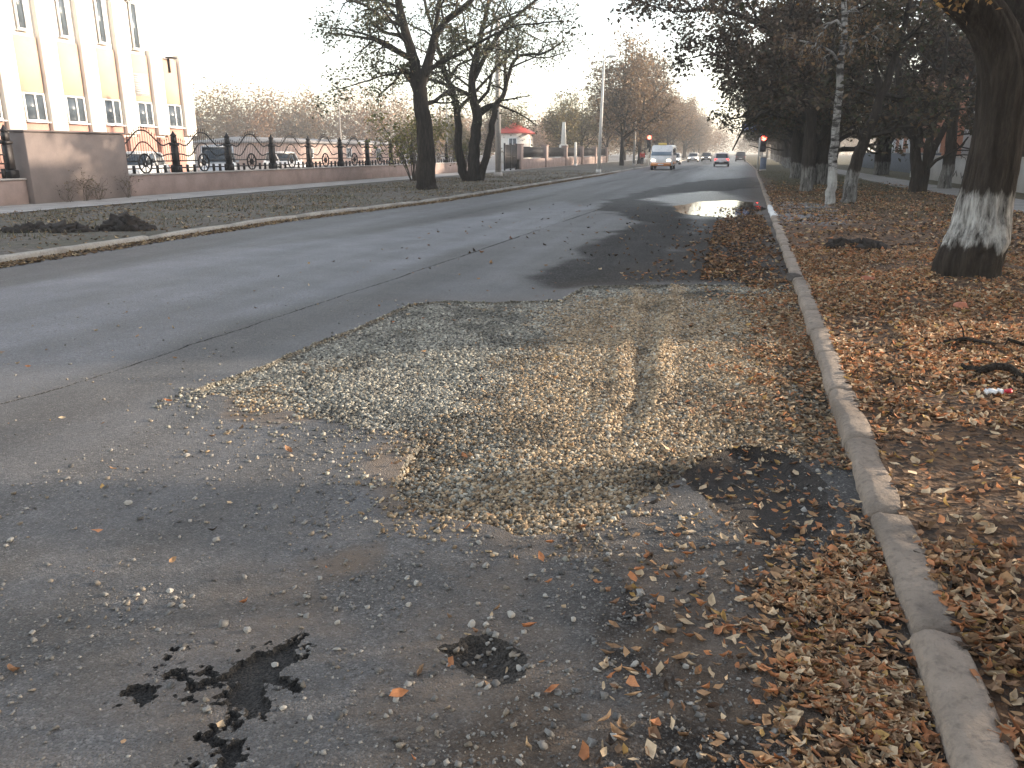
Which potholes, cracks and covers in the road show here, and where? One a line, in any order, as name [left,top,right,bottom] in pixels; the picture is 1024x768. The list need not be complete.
pothole [437,634,528,686]
pothole [192,284,842,536]
pothole [112,632,331,768]
